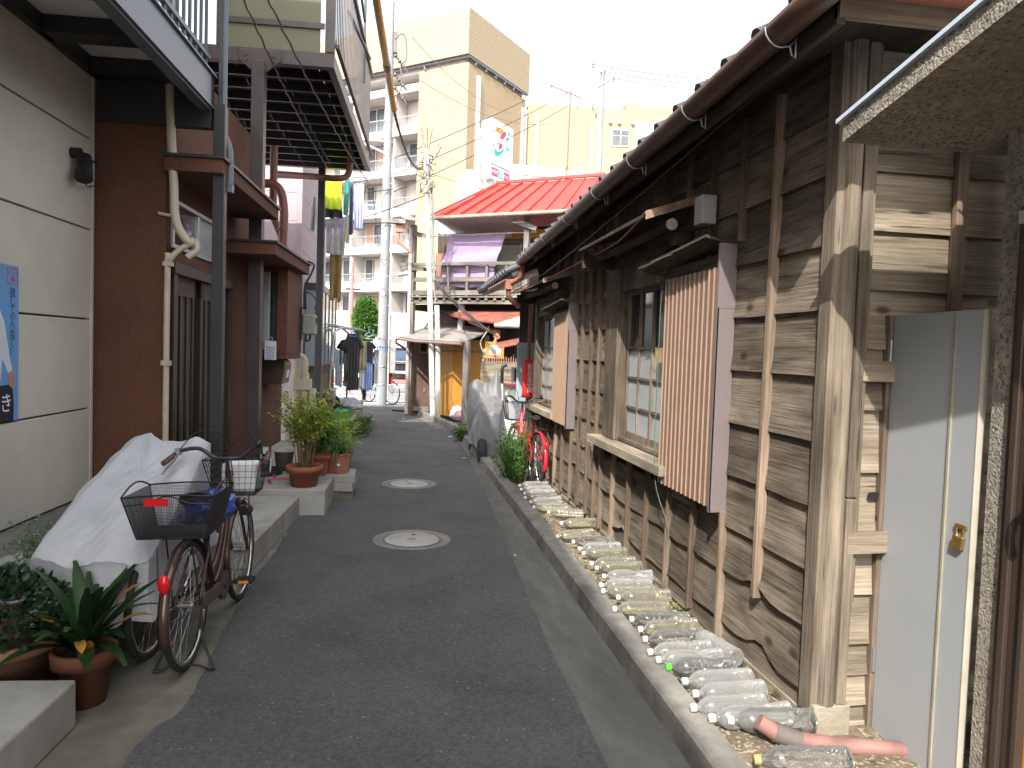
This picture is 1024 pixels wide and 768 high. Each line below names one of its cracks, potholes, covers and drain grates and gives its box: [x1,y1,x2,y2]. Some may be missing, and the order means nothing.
manhole cover [373,529,451,550]
manhole cover [381,479,437,489]
